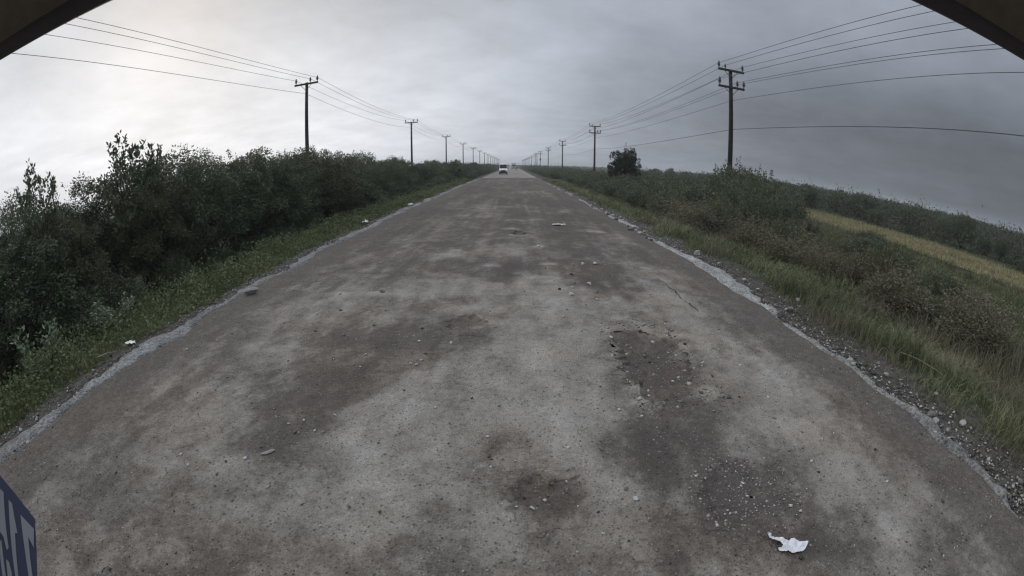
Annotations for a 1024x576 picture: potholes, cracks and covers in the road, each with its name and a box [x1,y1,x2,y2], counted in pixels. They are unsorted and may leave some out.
crack [658,278,698,311]
pothole [603,325,707,413]
pothole [491,465,599,538]
